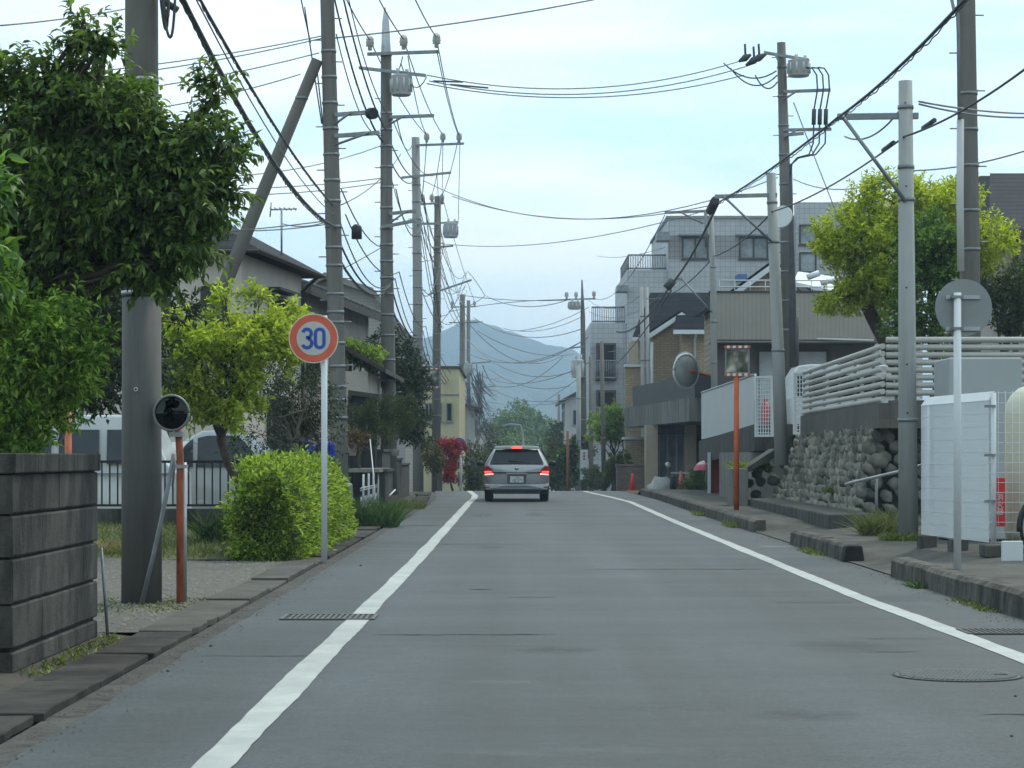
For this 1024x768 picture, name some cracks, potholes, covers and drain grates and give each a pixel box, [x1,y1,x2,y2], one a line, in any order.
manhole cover [892,668,1024,682]
